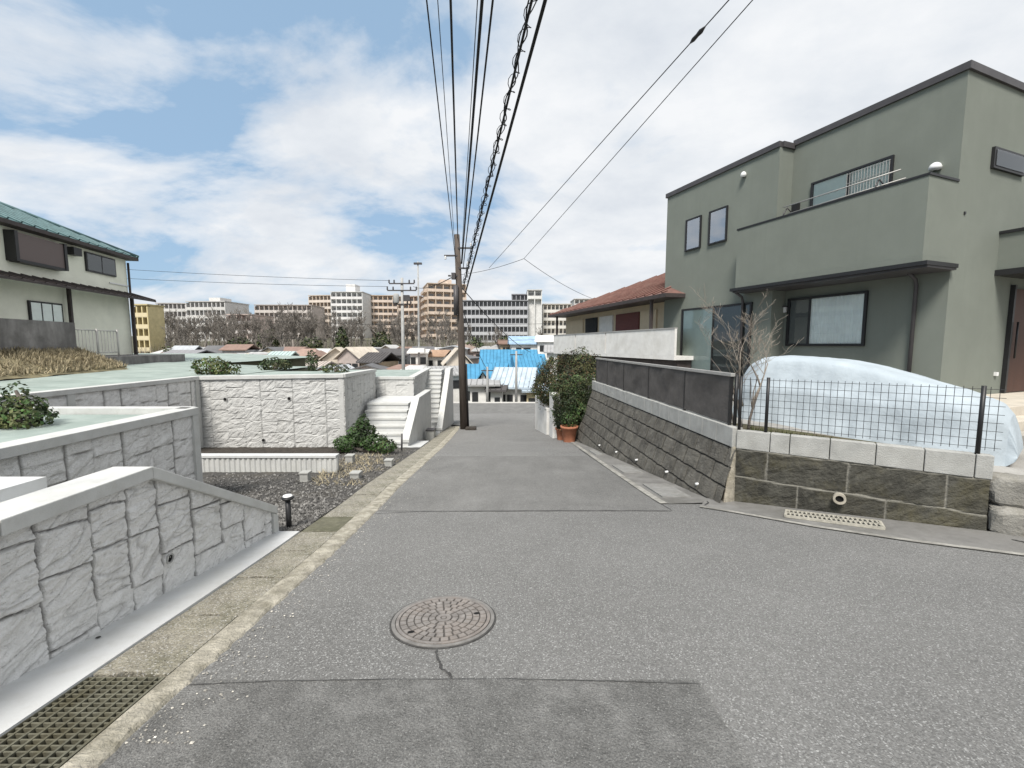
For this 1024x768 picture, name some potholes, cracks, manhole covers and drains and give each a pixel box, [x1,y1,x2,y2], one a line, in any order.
manhole cover [389,595,496,650]
crack [435,648,452,678]
drain grate [784,509,885,530]
drain grate [0,677,165,768]
